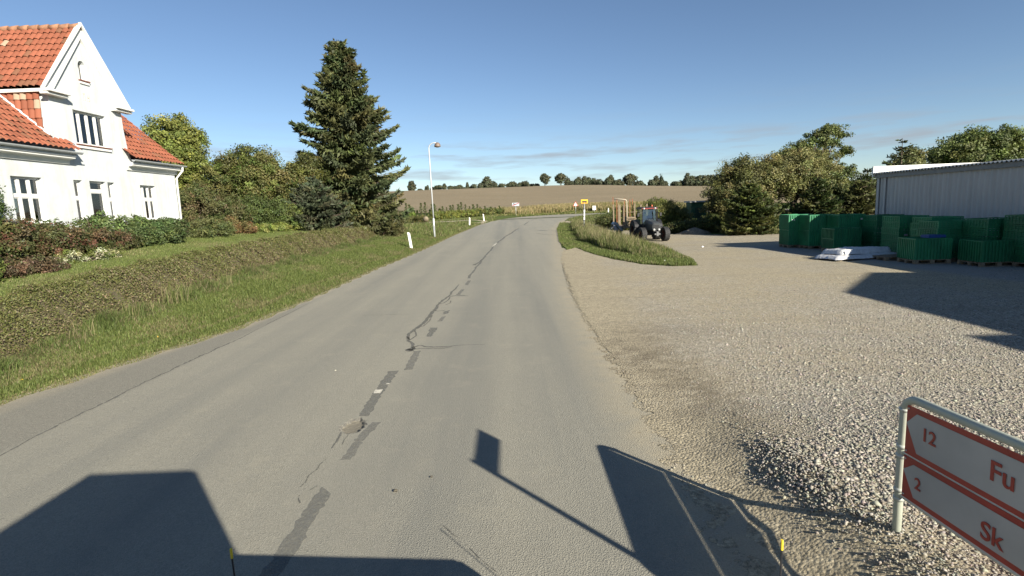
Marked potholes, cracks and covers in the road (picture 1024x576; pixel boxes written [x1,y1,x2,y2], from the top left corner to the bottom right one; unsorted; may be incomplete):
pothole [325,414,379,437]
crack [298,432,346,503]
